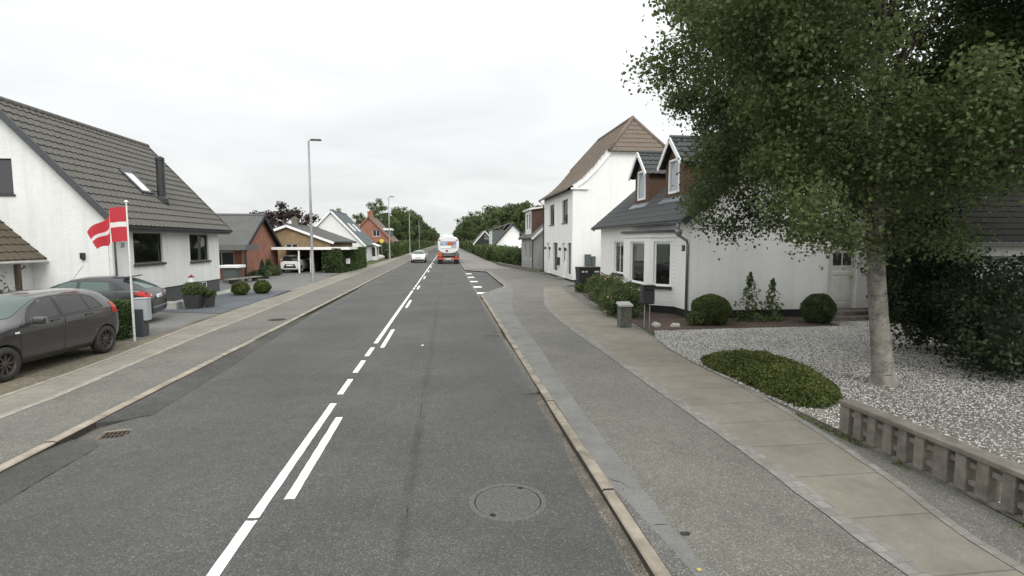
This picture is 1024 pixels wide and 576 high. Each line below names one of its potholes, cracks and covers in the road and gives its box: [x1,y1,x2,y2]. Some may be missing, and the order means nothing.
drain grate [96,429,132,439]
manhole cover [469,483,547,521]
